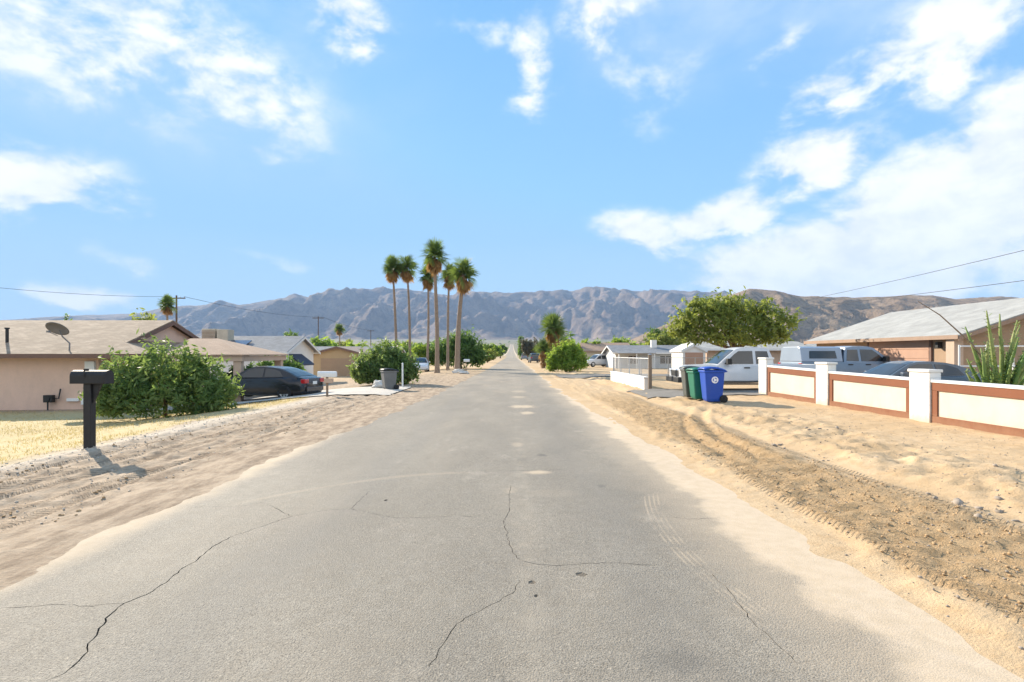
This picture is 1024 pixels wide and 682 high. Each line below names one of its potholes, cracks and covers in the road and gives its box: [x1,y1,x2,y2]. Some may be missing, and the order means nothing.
crack [10,492,445,681]
crack [503,488,639,566]
crack [429,586,516,666]
crack [712,574,795,661]
